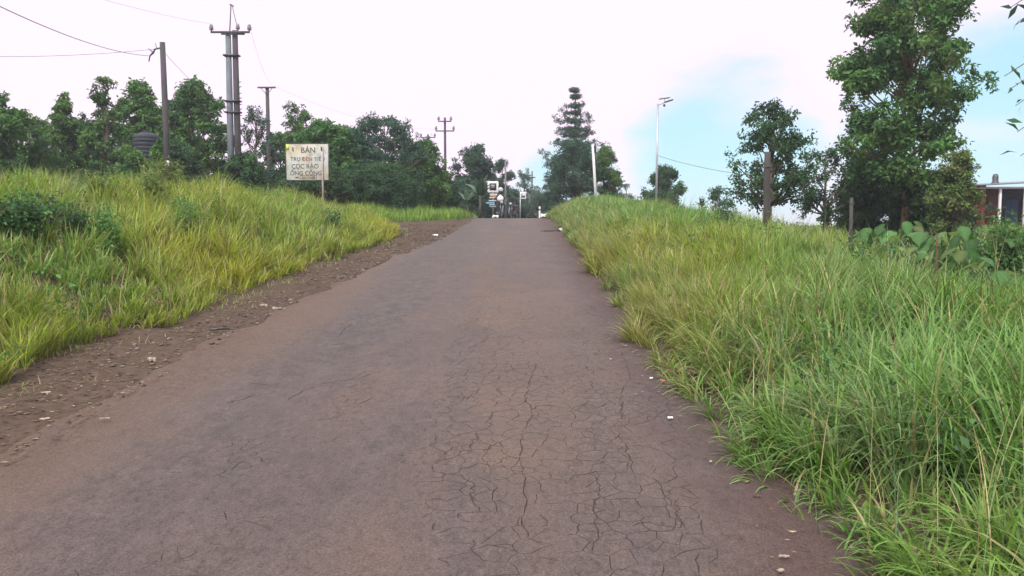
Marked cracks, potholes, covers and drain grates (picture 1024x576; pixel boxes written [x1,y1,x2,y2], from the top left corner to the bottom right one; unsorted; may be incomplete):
crack [417,283,566,576]
crack [555,293,718,576]
